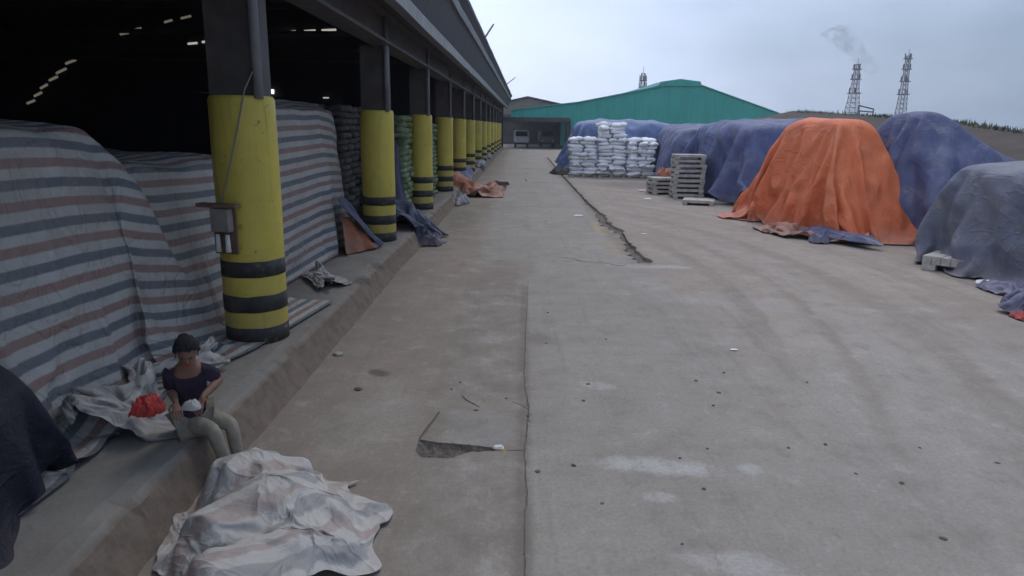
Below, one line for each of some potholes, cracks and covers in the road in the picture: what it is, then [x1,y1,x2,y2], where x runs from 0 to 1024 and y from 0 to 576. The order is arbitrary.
pothole [415,439,505,458]
crack [507,281,533,576]
crack [525,158,653,266]
